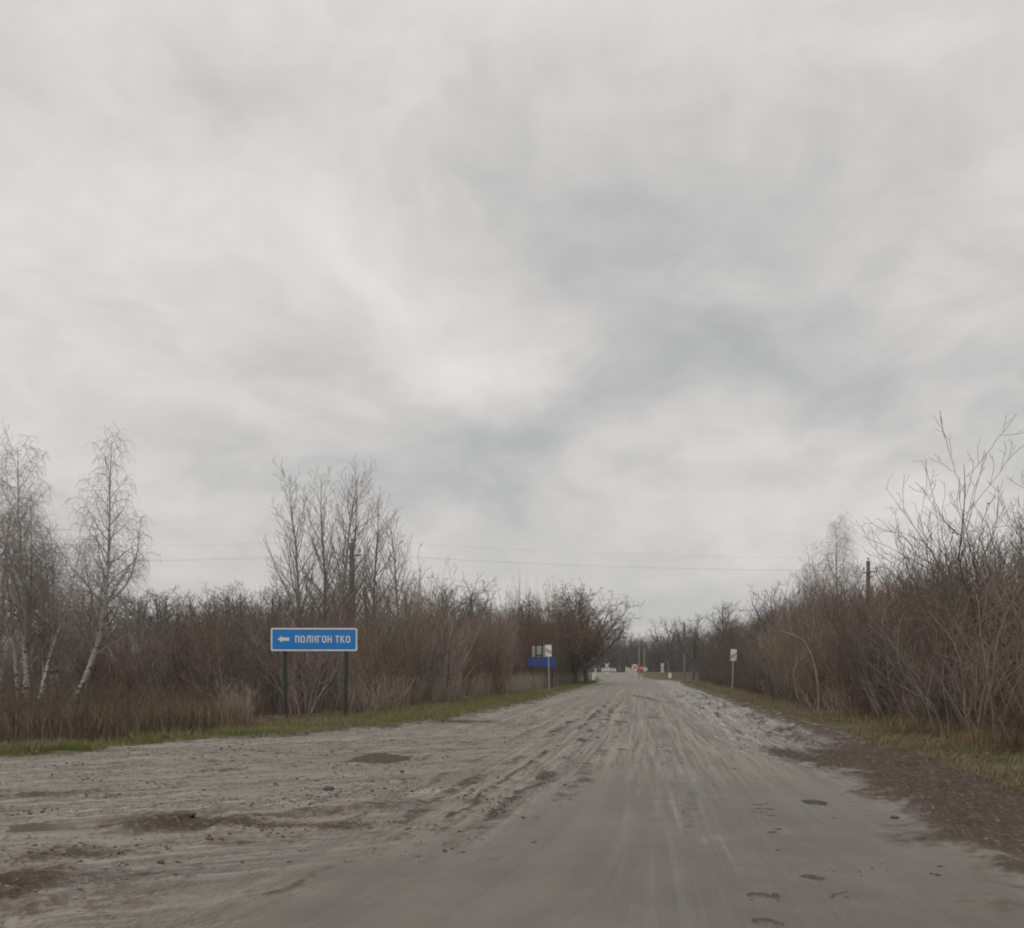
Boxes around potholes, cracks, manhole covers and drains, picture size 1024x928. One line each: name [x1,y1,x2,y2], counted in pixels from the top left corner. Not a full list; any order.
pothole [734,916,801,928]
